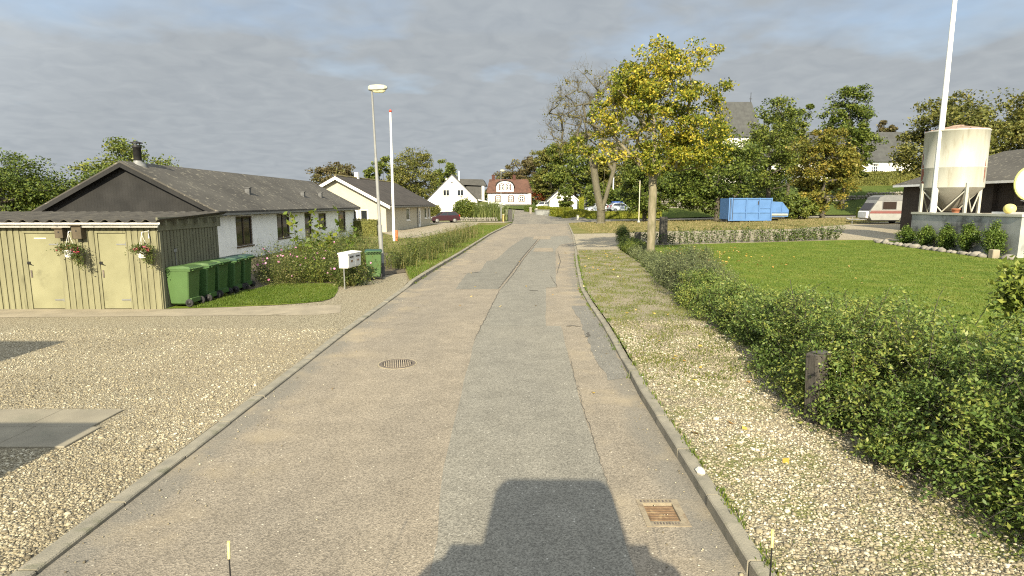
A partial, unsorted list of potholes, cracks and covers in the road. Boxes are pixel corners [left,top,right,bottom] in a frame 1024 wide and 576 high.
crack [570,364,608,485]
drain grate [636,499,692,527]
